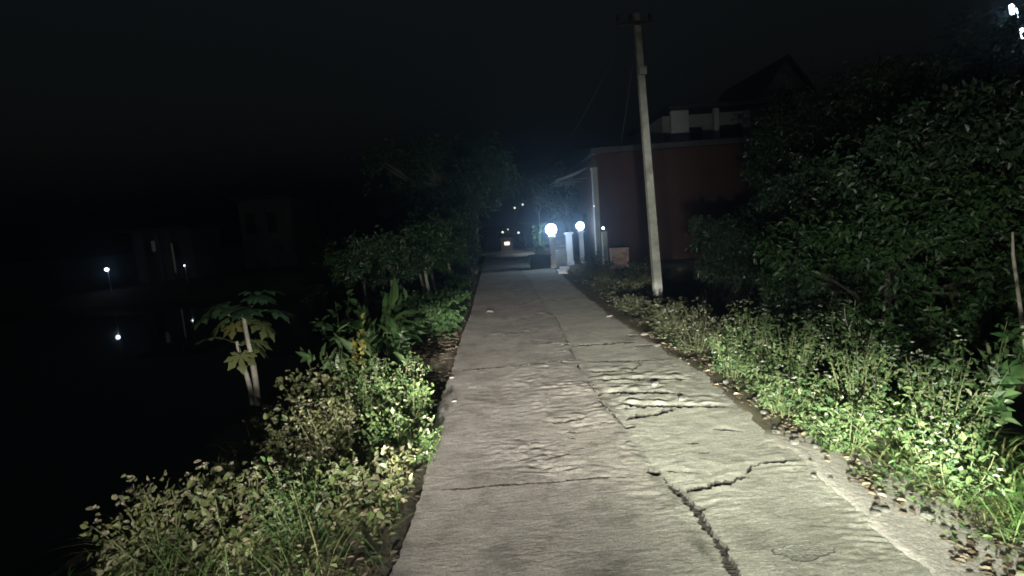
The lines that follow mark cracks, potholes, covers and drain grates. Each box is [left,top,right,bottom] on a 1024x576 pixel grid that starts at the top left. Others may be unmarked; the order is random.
crack [453,299,742,445]
crack [664,460,796,576]
